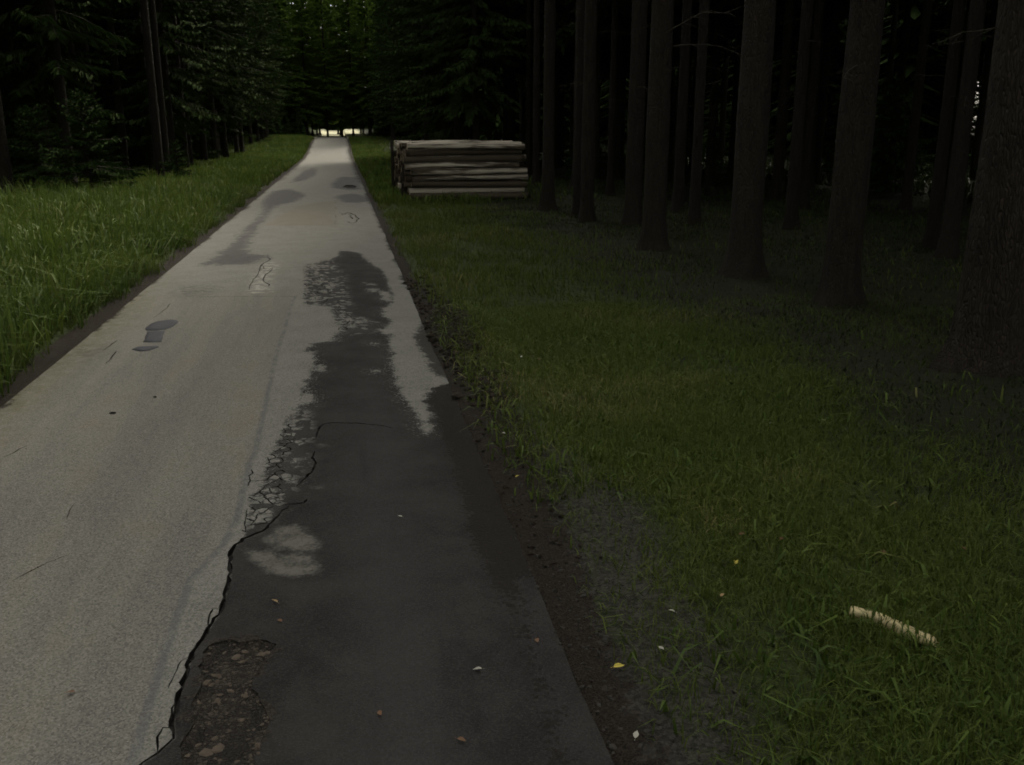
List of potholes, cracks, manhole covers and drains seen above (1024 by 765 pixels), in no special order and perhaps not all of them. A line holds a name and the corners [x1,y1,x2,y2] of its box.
pothole [179,639,276,765]
crack [139,422,391,765]
crack [249,254,273,290]
